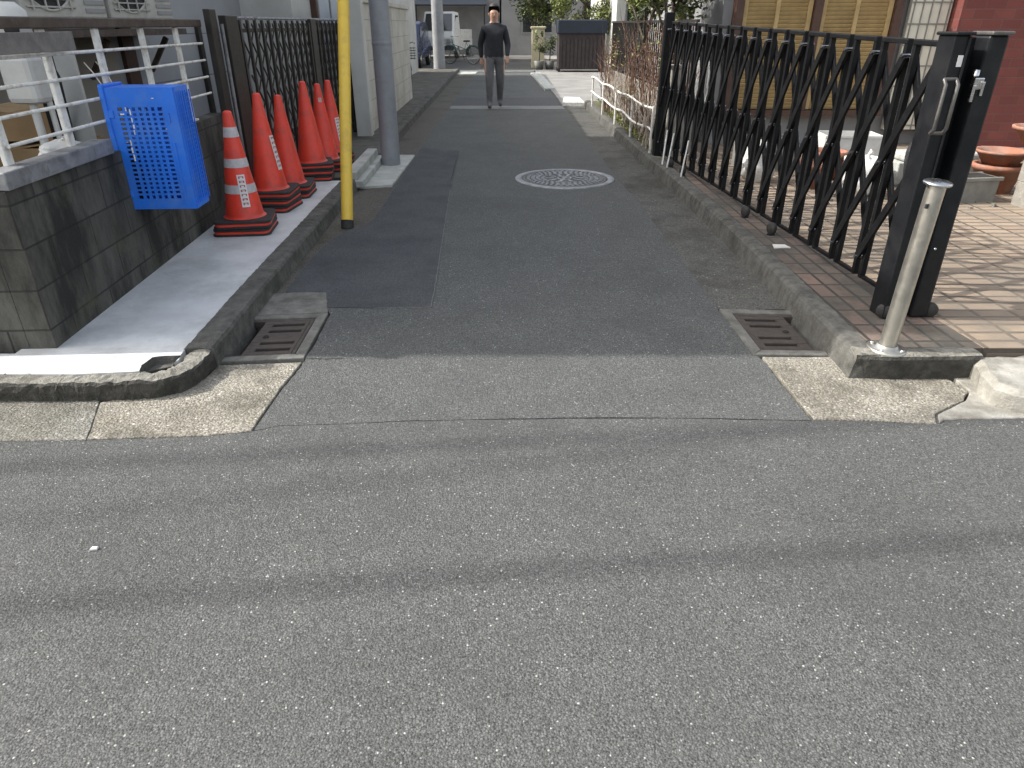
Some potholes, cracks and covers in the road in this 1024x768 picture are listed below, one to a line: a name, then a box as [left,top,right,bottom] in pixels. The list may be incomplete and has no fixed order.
manhole cover [515,169,615,189]
